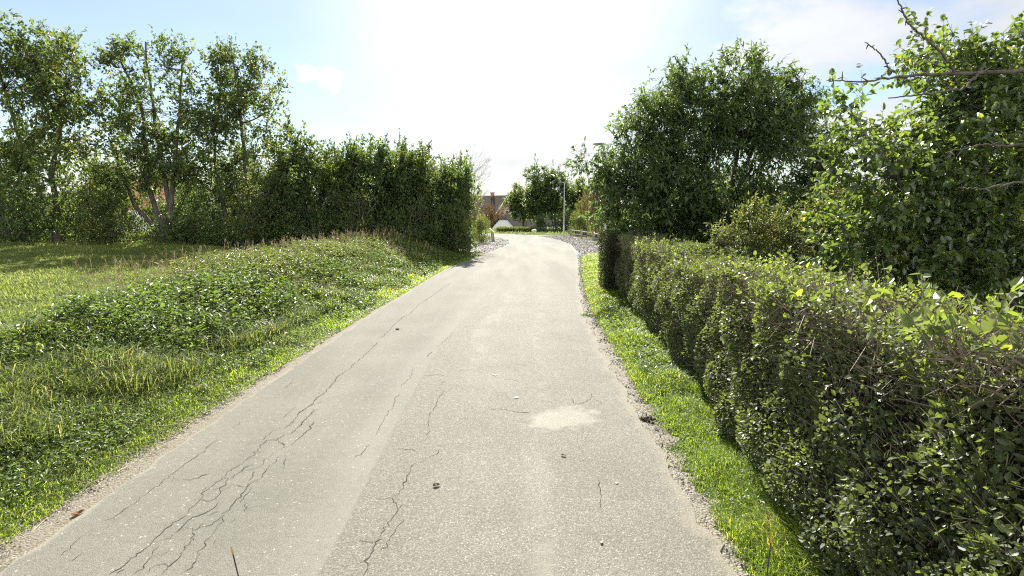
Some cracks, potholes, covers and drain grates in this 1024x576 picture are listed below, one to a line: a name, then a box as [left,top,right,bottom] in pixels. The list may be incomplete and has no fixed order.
crack [360,374,445,574]
